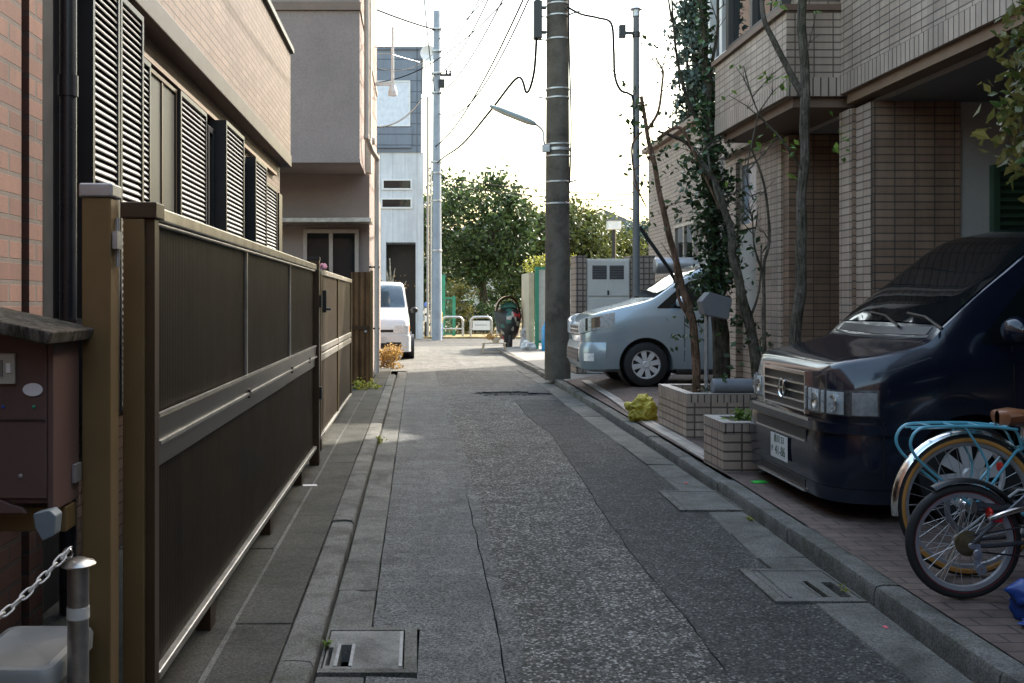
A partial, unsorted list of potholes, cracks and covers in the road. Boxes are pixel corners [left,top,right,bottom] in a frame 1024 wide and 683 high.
crack [468,501,506,683]
